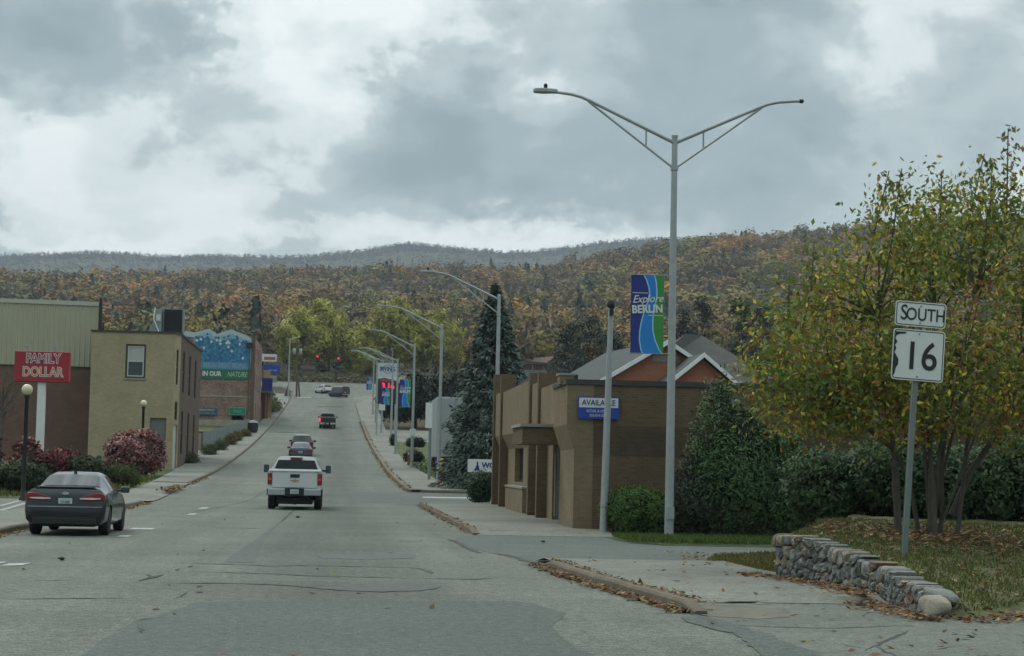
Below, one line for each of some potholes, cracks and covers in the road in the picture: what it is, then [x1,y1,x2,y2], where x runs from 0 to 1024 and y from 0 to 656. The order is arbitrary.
crack [743,625,913,656]
